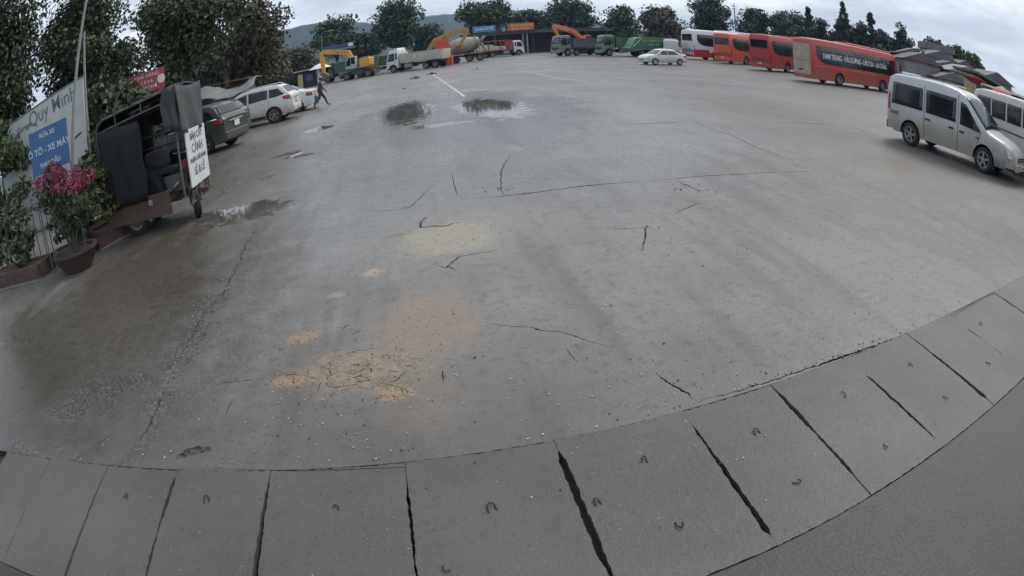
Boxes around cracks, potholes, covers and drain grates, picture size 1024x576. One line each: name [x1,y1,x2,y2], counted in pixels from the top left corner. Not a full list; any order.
crack [656,295,991,401]
crack [287,348,421,394]
crack [369,190,461,228]
crack [494,324,612,363]
